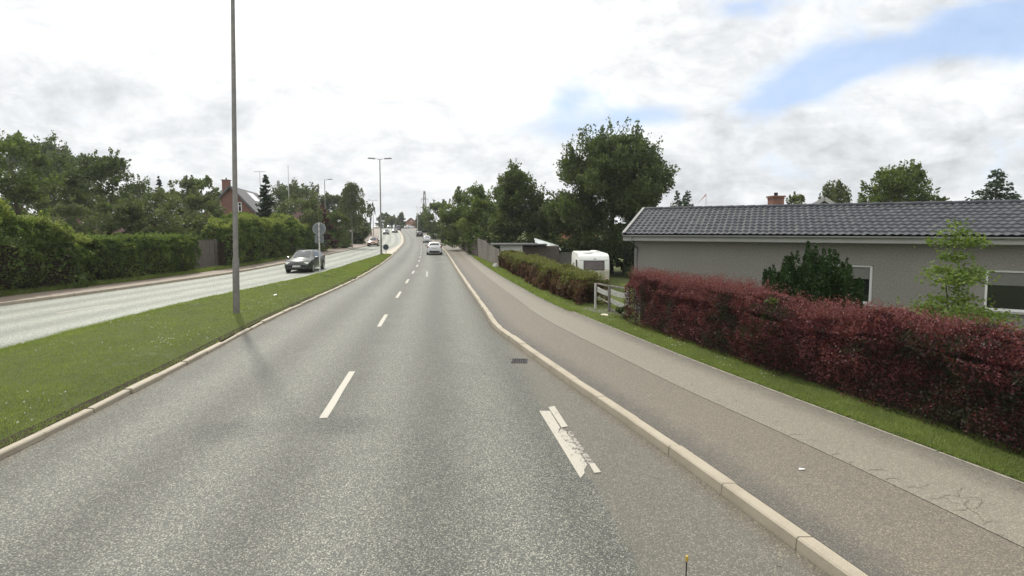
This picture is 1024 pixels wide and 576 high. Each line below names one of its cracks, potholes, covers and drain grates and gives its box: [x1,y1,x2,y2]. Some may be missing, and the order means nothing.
crack [905,483,1008,540]
